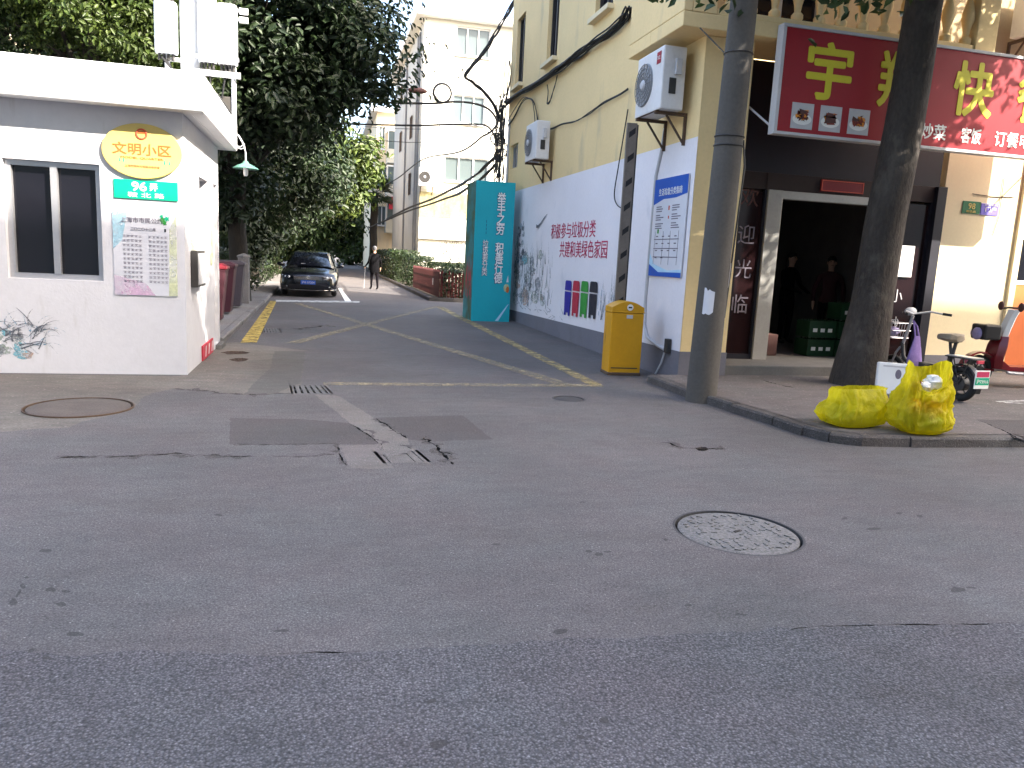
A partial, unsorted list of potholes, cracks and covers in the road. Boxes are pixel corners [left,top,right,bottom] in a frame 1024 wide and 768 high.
drain grate [290,386,332,394]
manhole cover [21,397,135,418]
crack [61,443,346,465]
manhole cover [673,510,806,556]
crack [662,442,723,451]
drain grate [374,450,430,463]
crack [354,419,454,465]
